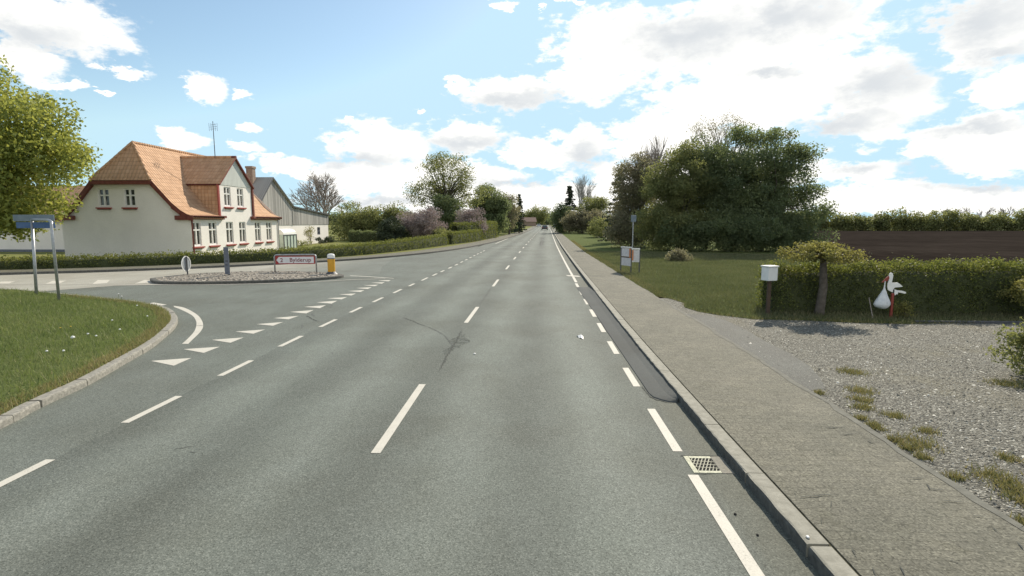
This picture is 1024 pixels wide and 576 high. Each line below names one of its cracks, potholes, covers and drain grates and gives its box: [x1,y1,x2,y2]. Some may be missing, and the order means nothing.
drain grate [683,456,735,474]
crack [406,318,462,371]
